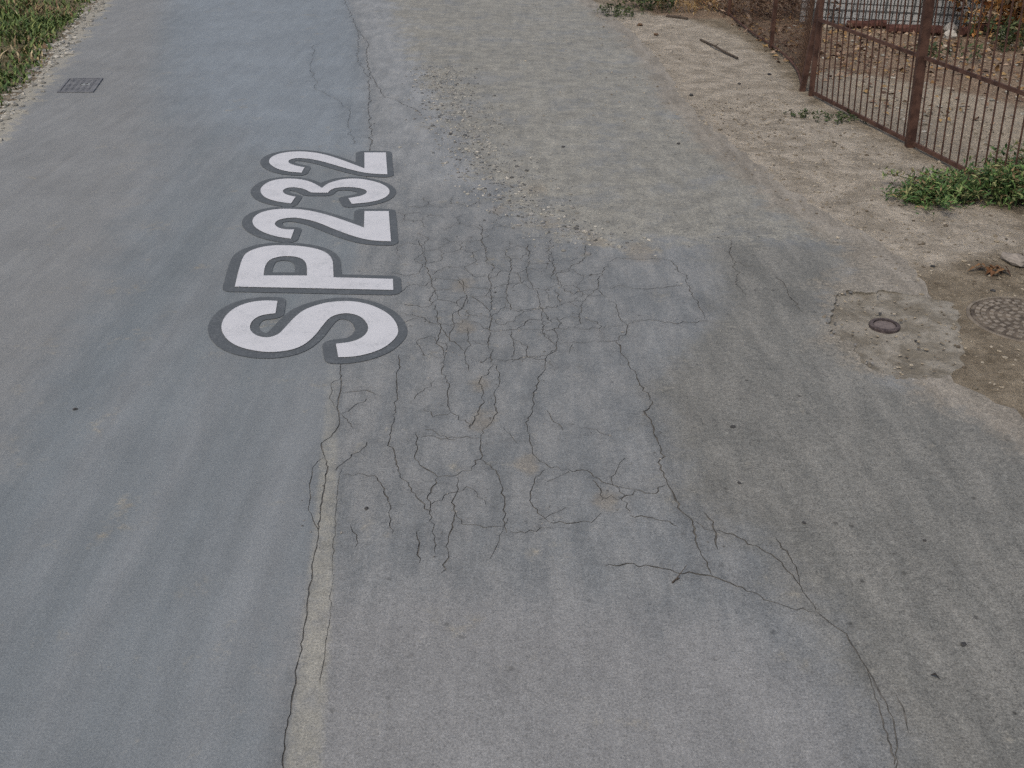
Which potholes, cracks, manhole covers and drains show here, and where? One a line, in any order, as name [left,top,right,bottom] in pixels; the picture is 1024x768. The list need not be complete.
crack [309,1,420,177]
crack [282,364,373,768]
crack [336,197,816,612]
manhole cover [966,297,1024,343]
crack [896,695,909,733]
manhole cover [869,318,901,334]
